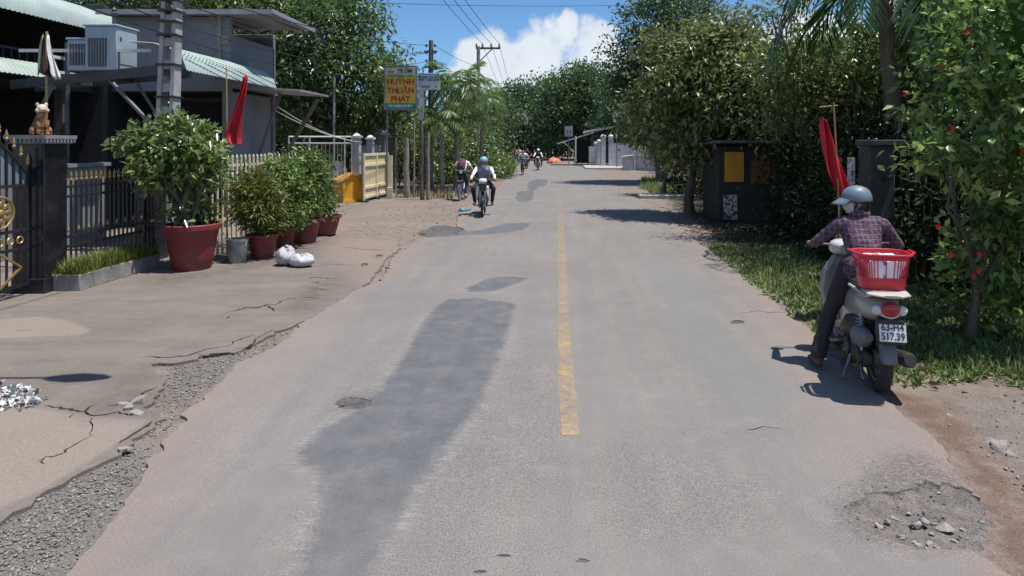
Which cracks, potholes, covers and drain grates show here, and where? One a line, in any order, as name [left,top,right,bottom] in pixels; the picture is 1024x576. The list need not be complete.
pothole [335,397,371,409]
pothole [844,479,996,551]
crack [38,387,157,464]
crack [146,329,274,358]
crack [224,277,336,319]
